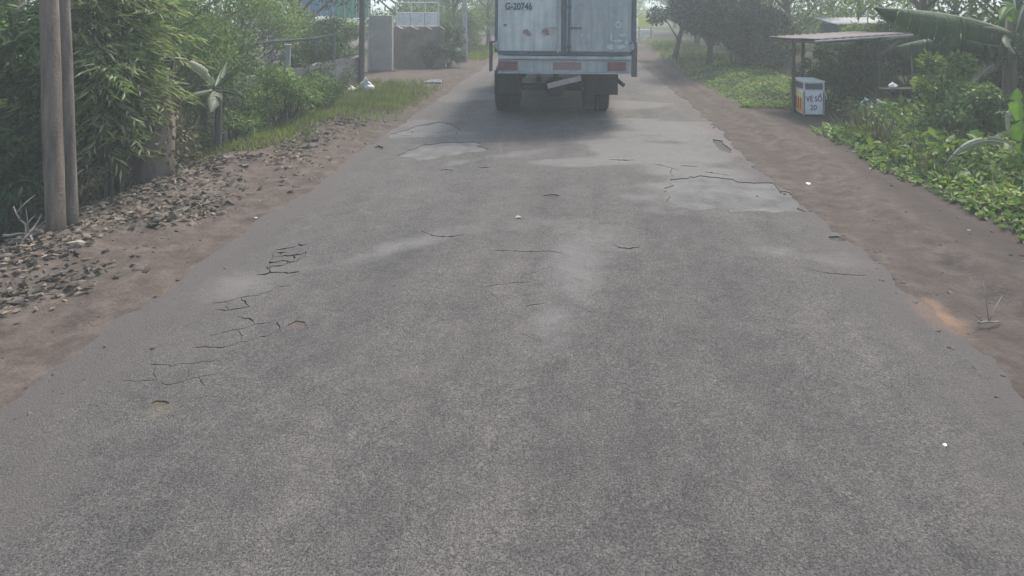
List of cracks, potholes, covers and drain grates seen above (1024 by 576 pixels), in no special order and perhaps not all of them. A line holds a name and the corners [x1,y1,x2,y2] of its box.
pothole [713,139,732,153]
crack [123,243,309,392]
